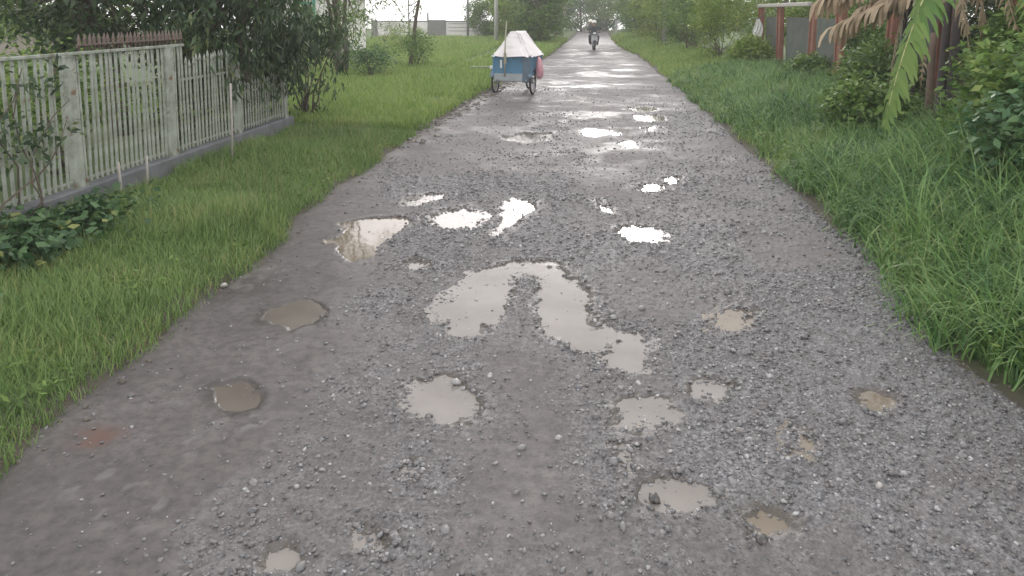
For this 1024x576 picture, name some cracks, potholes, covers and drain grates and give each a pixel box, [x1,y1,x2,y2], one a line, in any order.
pothole [247,295,341,339]
pothole [385,365,500,433]
pothole [835,380,915,421]
pothole [195,376,275,421]
pothole [424,253,661,381]
pothole [480,196,548,241]
pothole [588,383,693,441]
pothole [612,461,729,530]
pothole [600,220,681,247]
pothole [656,173,691,185]
pothole [395,190,463,208]
pothole [724,492,815,557]
